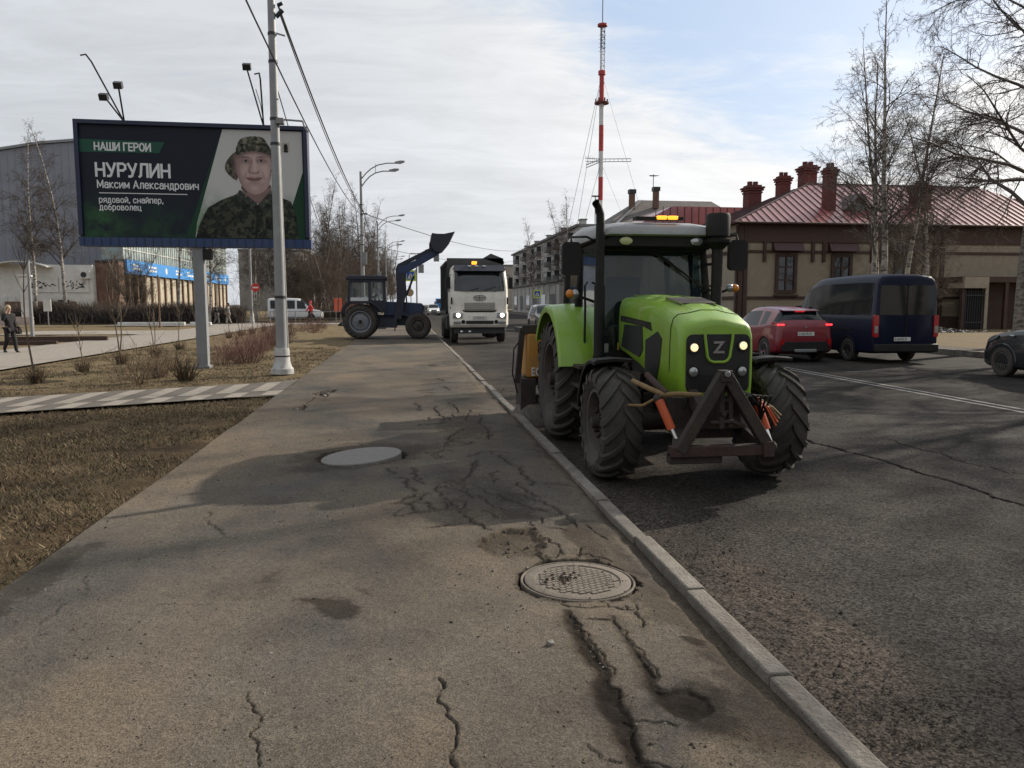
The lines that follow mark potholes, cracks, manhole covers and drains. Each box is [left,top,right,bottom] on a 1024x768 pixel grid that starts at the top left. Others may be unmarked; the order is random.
manhole cover [321,447,402,468]
crack [569,617,653,766]
crack [437,682,458,768]
crack [388,404,590,562]
pothole [496,527,545,558]
manhole cover [520,562,635,603]
